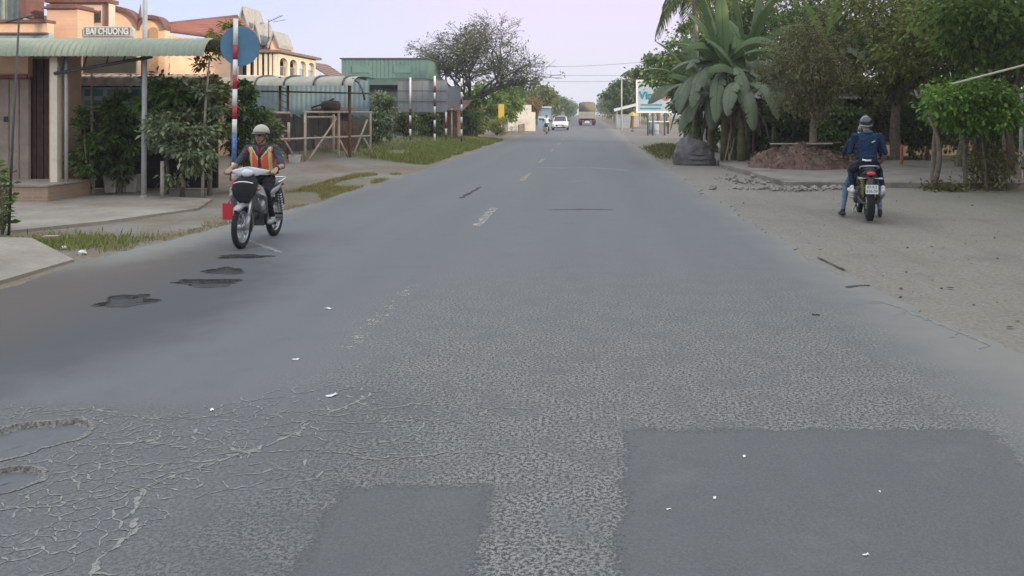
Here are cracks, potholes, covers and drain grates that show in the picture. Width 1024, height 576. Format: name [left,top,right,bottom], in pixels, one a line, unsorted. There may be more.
pothole [200,266,245,274]
pothole [169,279,243,288]
pothole [0,416,96,461]
pothole [91,294,162,307]
pothole [0,465,49,494]
